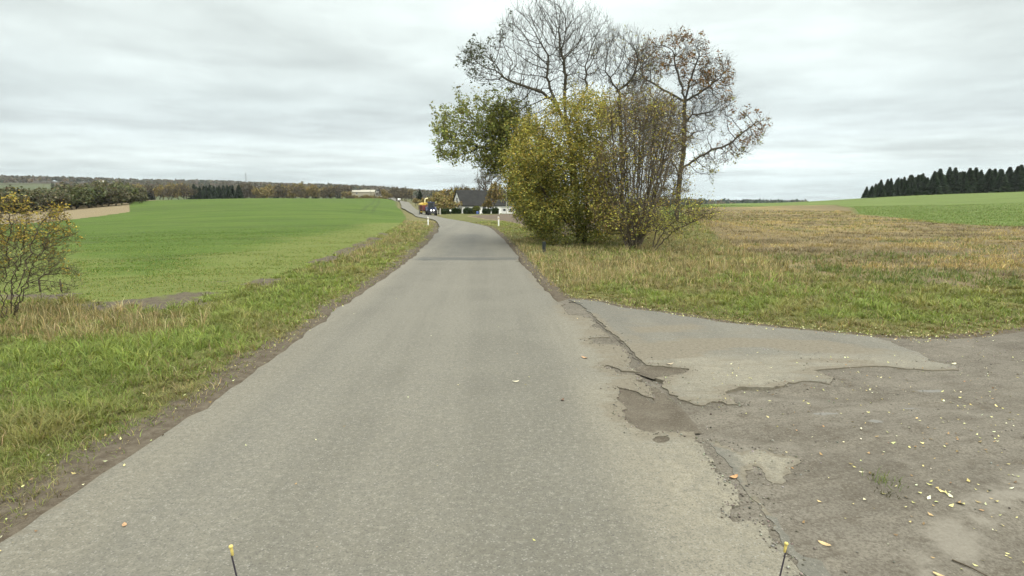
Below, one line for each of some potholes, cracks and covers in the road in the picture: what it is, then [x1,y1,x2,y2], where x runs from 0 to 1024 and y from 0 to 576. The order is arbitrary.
pothole [635,365,688,379]
pothole [617,381,701,434]
